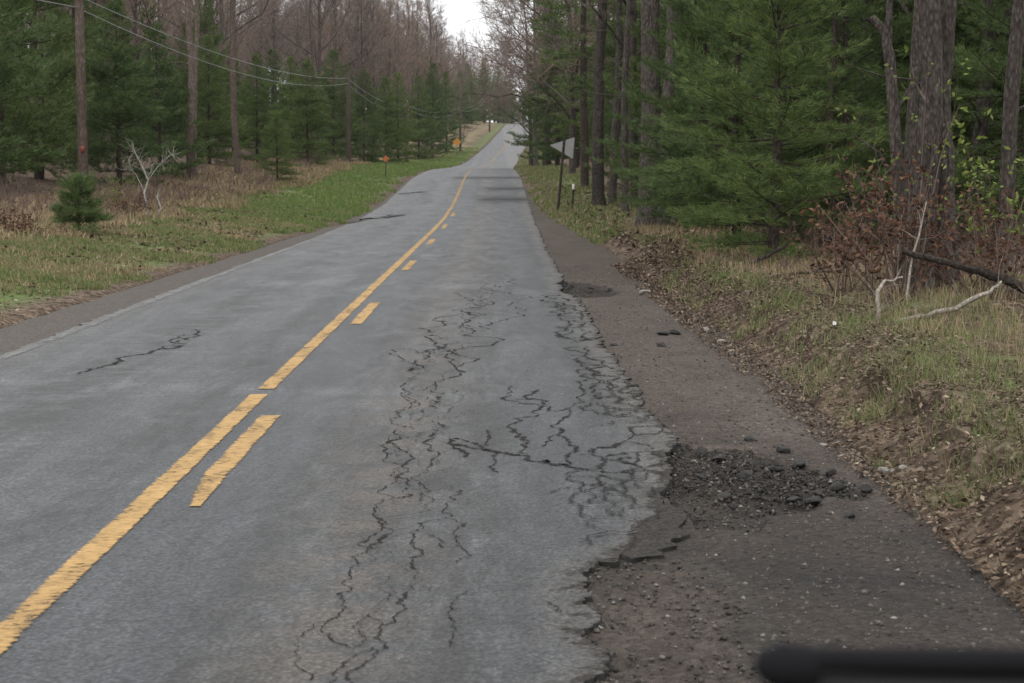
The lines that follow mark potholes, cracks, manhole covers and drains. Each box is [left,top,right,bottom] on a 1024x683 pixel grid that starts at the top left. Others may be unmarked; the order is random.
crack [294,279,664,683]
pothole [664,444,872,533]
pothole [563,283,619,298]
crack [79,329,201,373]
